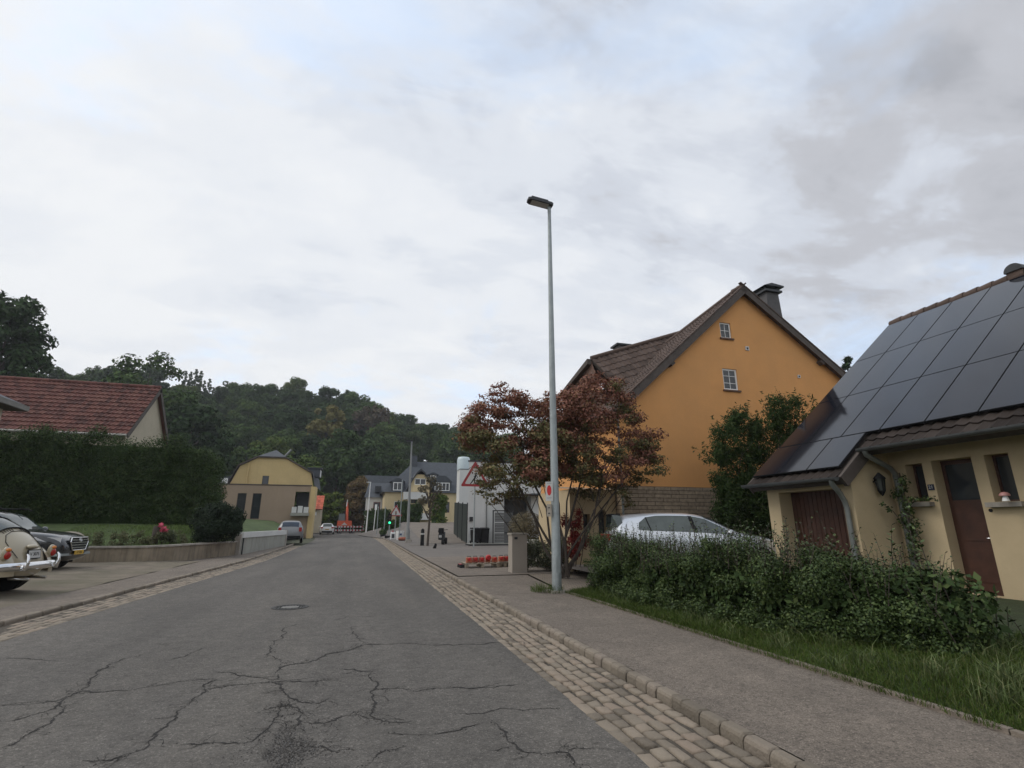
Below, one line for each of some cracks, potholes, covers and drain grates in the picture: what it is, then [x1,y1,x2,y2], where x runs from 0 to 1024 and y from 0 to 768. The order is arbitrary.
crack [0,624,521,768]
crack [337,668,609,768]
